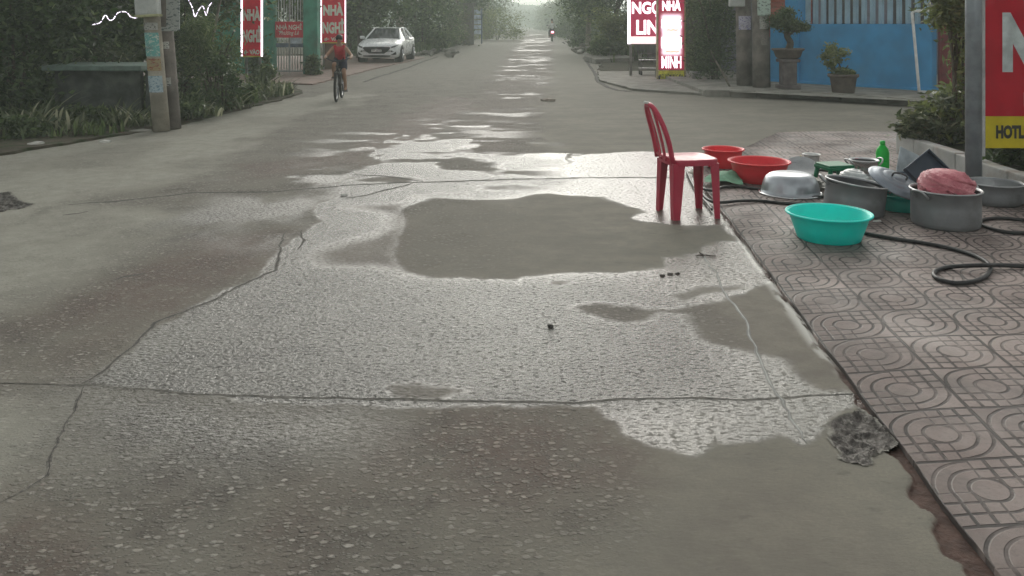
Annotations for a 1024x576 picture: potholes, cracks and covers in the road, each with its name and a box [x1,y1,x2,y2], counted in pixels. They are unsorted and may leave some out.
crack [698,251,807,443]
pothole [0,191,34,212]
pothole [825,407,898,466]
crack [0,211,306,503]
